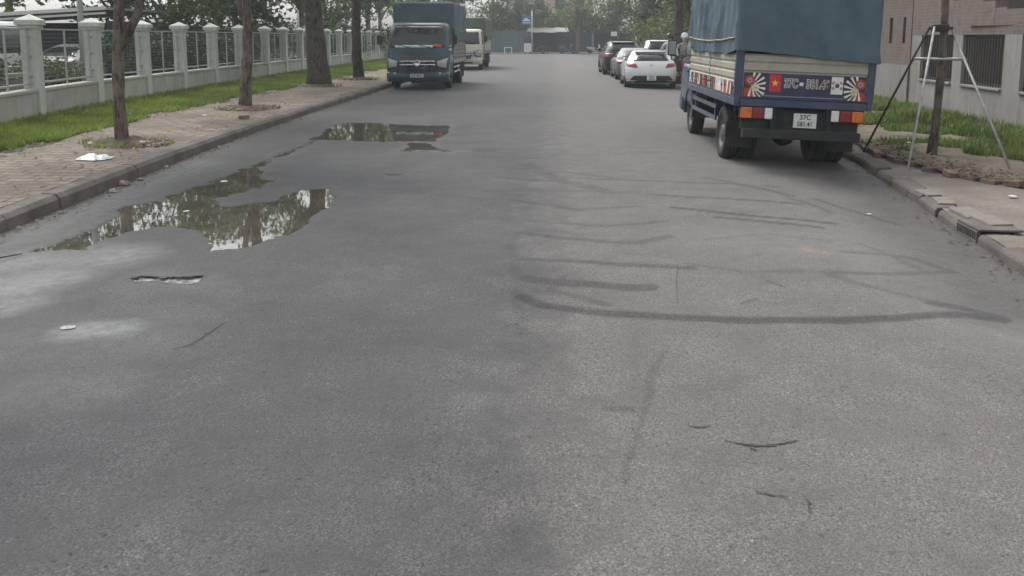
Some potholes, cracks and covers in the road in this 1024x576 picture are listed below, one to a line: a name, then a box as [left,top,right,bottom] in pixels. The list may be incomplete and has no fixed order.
crack [726,440,799,451]
pothole [123,274,208,285]
drain grate [956,218,1024,243]
